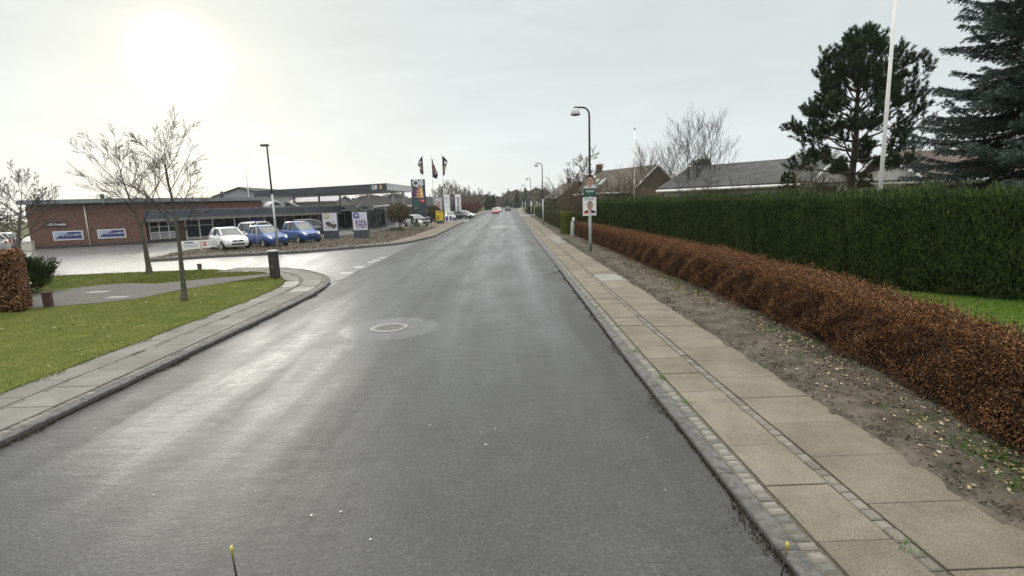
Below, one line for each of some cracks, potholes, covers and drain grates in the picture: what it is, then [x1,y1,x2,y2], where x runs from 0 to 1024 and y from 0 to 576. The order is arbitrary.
manhole cover [370,323,408,332]
